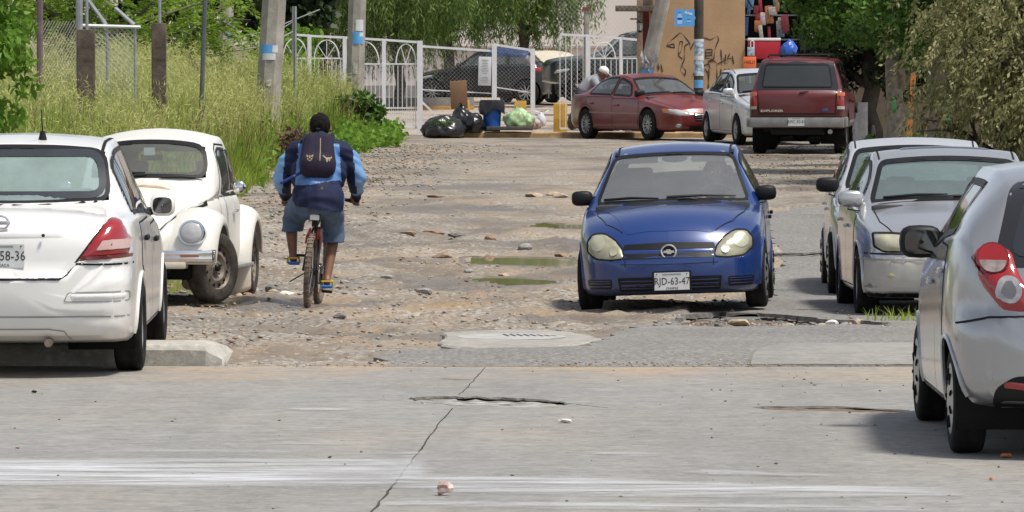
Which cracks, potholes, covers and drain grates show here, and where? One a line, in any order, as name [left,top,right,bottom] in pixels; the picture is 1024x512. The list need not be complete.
crack [294,368,485,512]
manhole cover [437,329,602,349]
pothole [409,396,570,407]
pothole [674,312,888,327]
